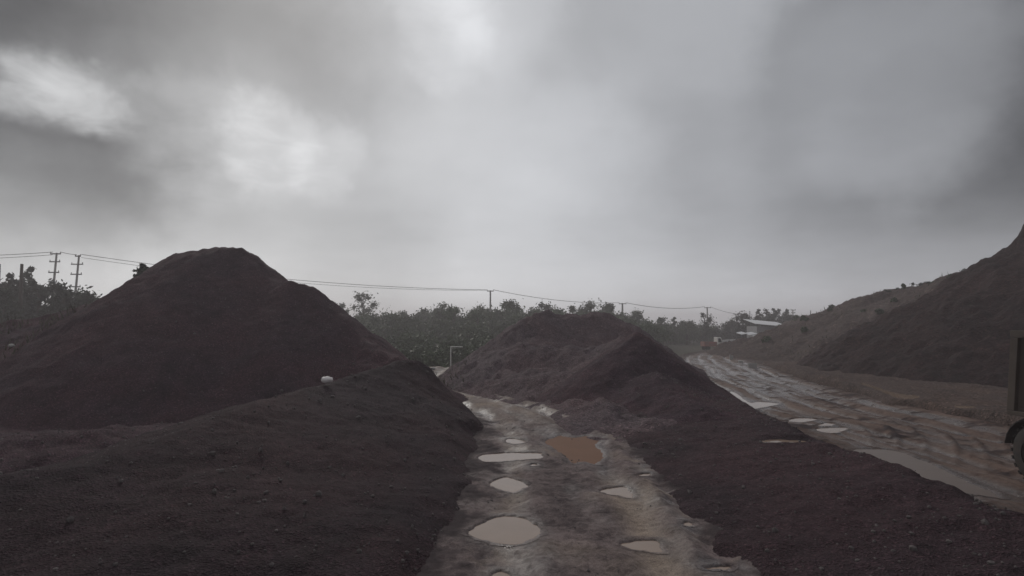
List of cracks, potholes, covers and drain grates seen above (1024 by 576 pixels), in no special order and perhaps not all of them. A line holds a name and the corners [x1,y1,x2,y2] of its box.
pothole [484,475,535,494]
pothole [473,450,548,462]
pothole [461,513,549,547]
pothole [612,536,670,554]
pothole [845,446,1013,500]
pothole [538,433,610,465]
pothole [594,484,638,499]
pothole [812,425,852,434]
